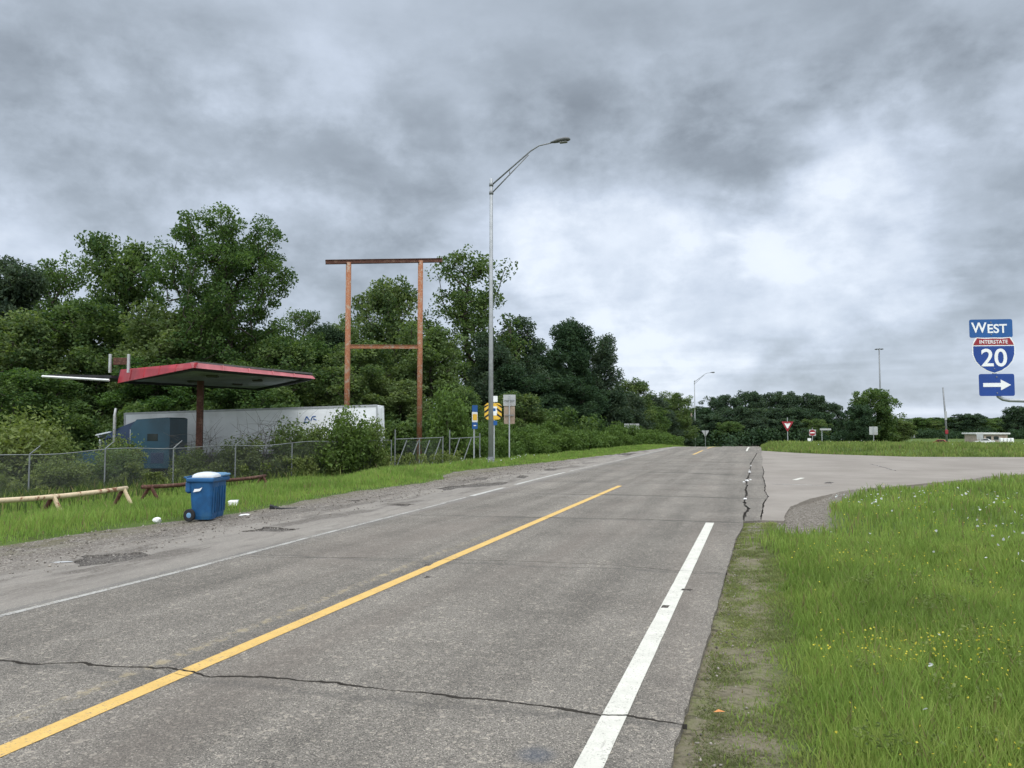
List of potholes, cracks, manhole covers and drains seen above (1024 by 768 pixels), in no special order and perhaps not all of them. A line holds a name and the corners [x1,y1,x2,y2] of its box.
pothole [73,552,150,567]
crack [0,660,687,730]
pothole [437,482,509,490]
crack [663,453,757,521]
